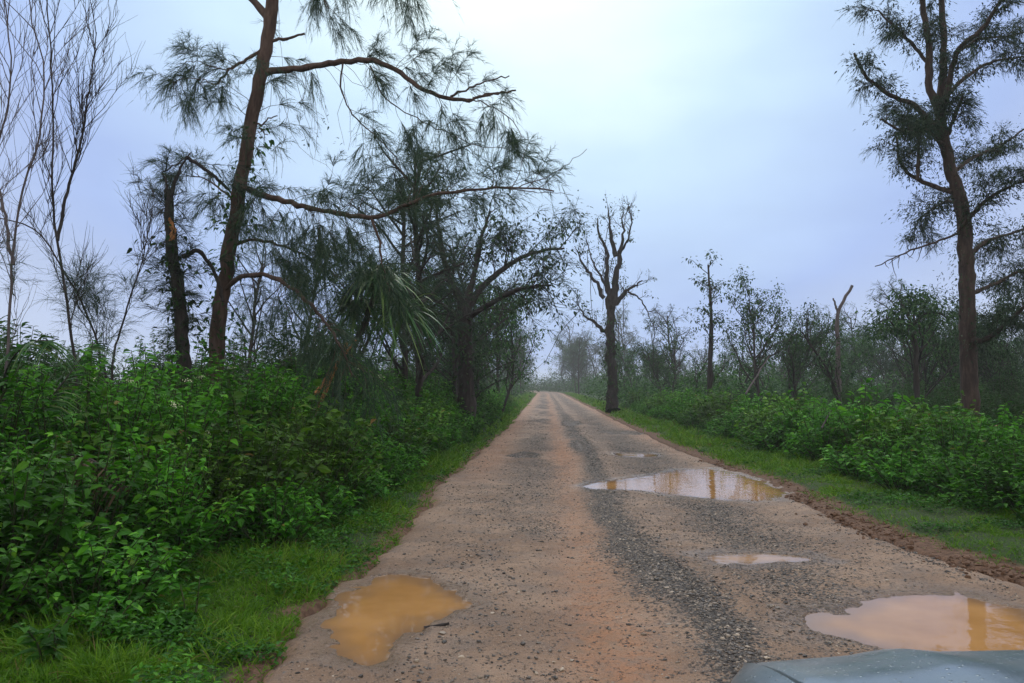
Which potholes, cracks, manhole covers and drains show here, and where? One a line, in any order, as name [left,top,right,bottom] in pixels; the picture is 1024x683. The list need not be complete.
pothole [796,587,1024,651]
pothole [698,550,834,567]
pothole [578,468,794,501]
pothole [302,570,488,668]
